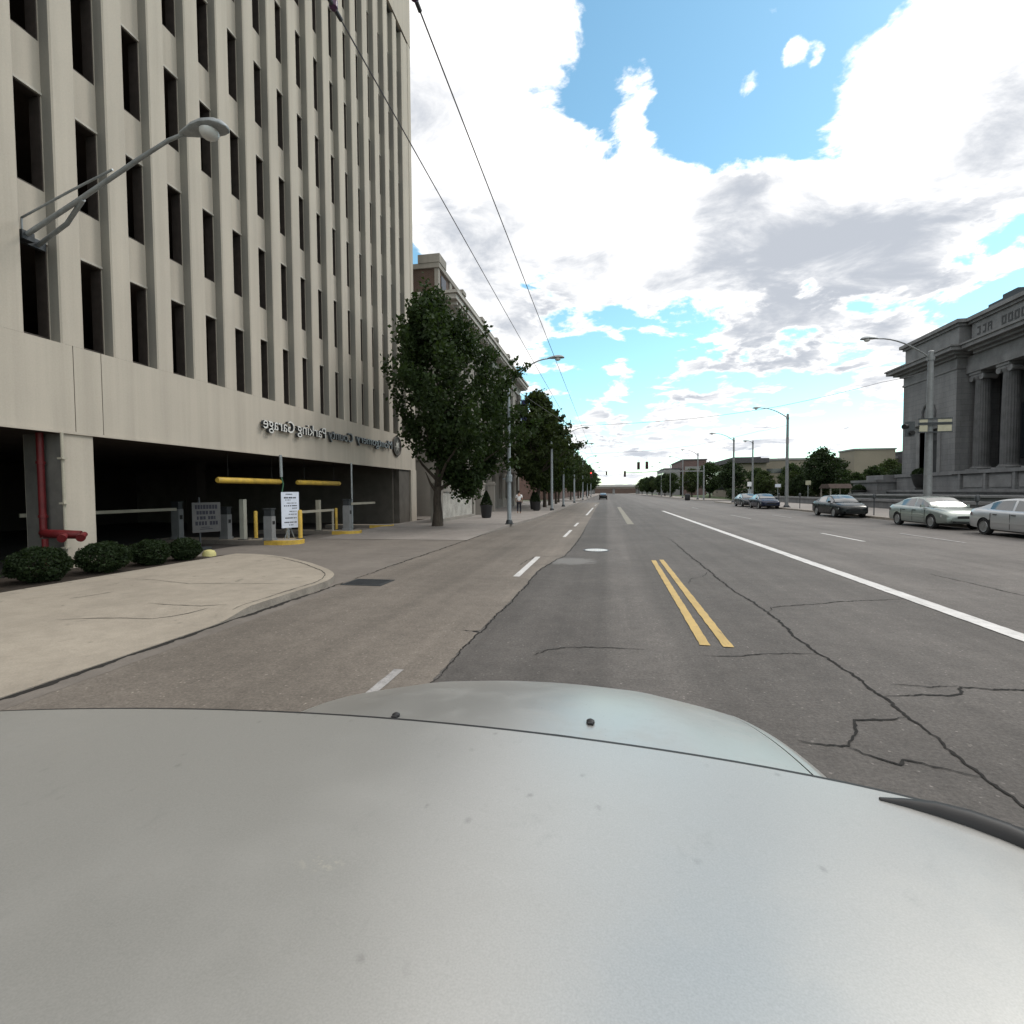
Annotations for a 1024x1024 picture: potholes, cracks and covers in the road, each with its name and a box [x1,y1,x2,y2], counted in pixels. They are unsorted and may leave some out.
crack [670,539,1024,807]
crack [534,646,634,655]
